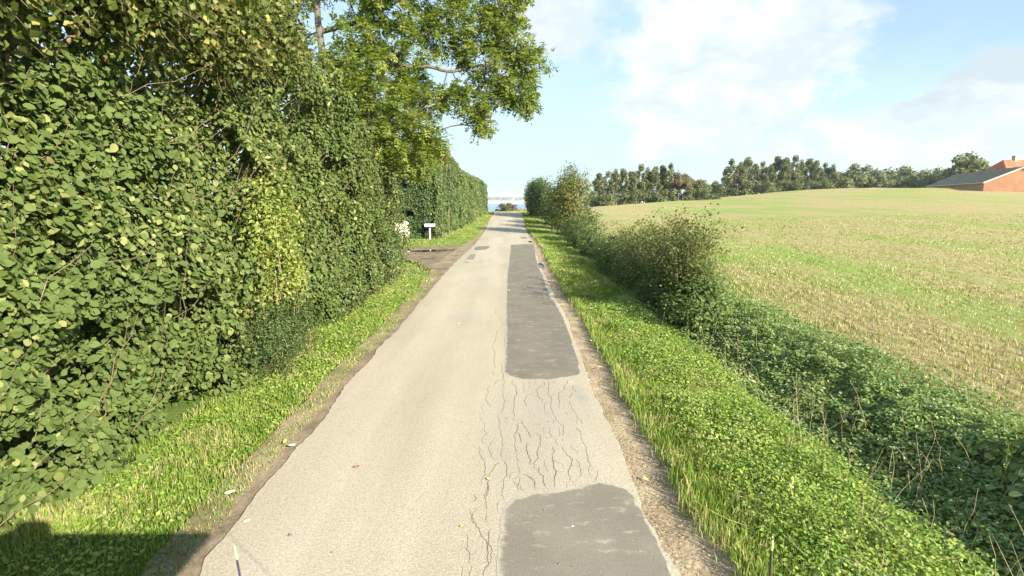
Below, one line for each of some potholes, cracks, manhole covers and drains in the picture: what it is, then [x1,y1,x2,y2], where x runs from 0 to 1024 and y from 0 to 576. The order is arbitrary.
crack [461,373,598,576]
